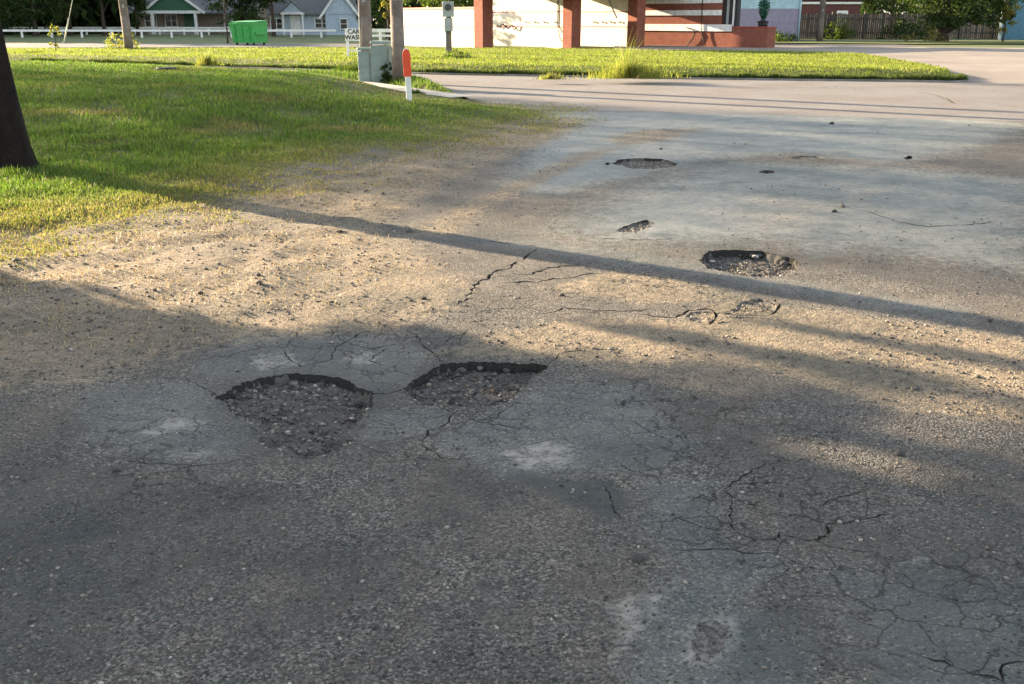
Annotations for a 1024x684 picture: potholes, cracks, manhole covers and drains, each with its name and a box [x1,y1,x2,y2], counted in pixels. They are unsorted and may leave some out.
crack [538,300,781,325]
pothole [612,158,677,169]
crack [458,241,595,311]
crack [358,403,562,464]
crack [668,463,886,571]
crack [226,329,470,367]
pothole [617,220,655,233]
pothole [399,361,548,410]
pothole [698,250,804,279]
pothole [686,311,715,322]
pothole [730,298,776,314]
pothole [215,373,376,464]
